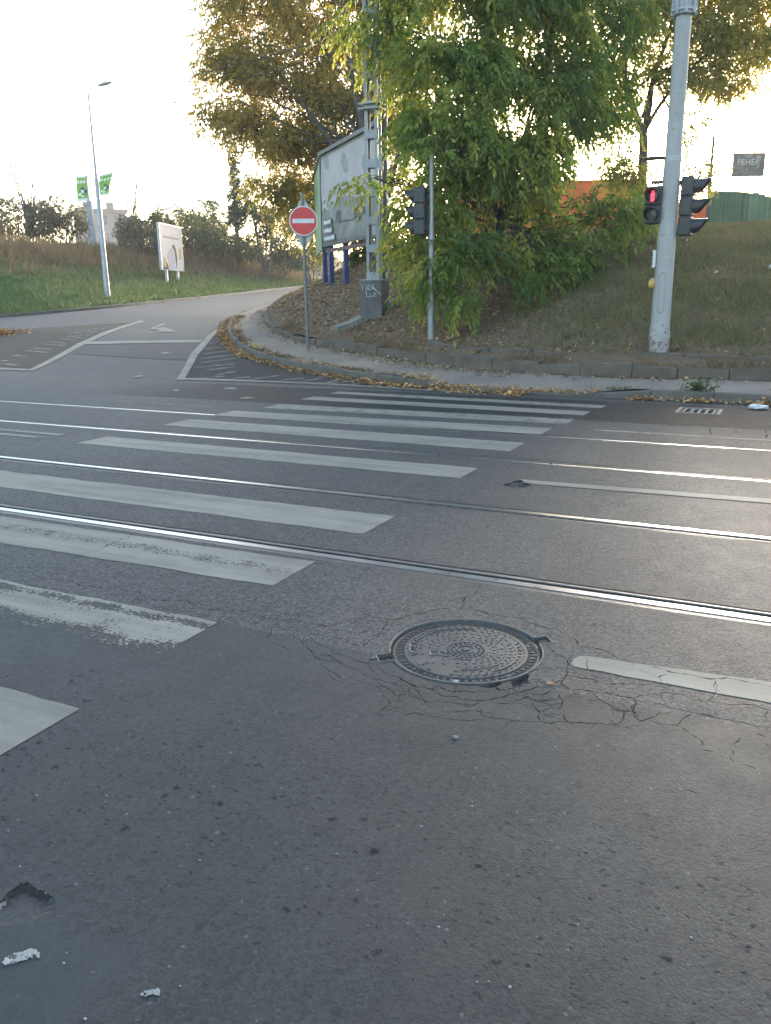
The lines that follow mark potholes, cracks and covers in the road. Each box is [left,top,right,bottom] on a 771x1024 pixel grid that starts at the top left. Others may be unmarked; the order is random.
pothole [0,882,56,926]
crack [253,591,769,793]
manhole cover [371,618,554,685]
pothole [503,480,530,489]
drain grate [676,407,723,415]
